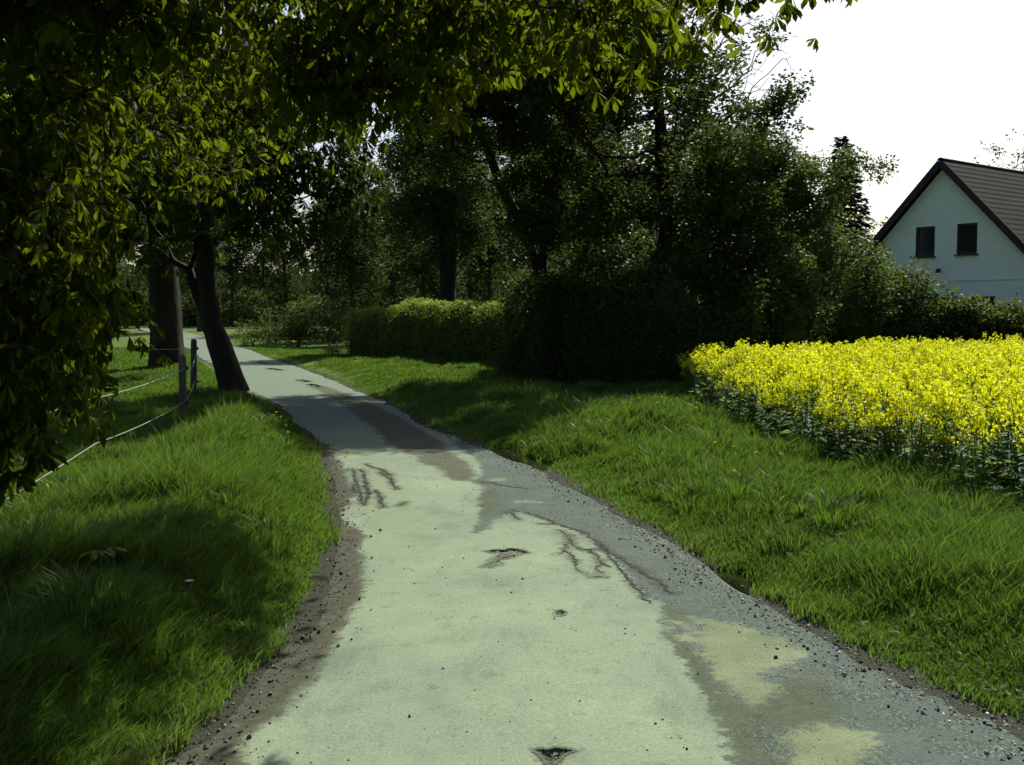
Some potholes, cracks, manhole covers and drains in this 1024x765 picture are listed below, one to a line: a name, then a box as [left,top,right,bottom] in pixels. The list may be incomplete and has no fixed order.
crack [510,510,674,604]
crack [352,463,406,507]
pothole [531,746,577,765]
pothole [484,548,530,567]
